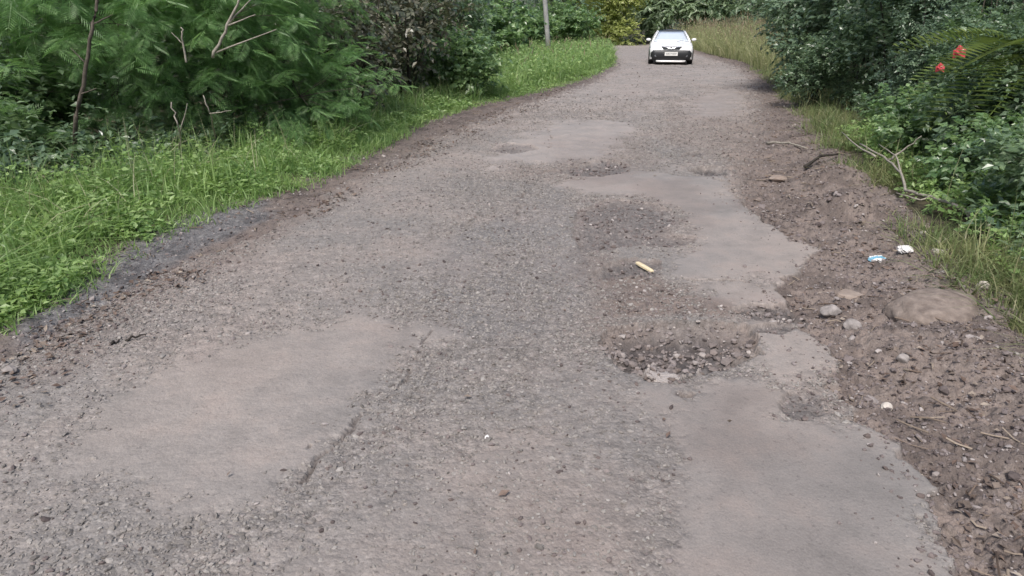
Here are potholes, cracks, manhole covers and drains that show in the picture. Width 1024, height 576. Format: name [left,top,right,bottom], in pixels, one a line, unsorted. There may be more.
pothole [570,198,698,254]
pothole [595,317,768,384]
pothole [485,142,539,155]
pothole [773,387,828,422]
pothole [551,158,633,177]
crack [294,323,446,485]
